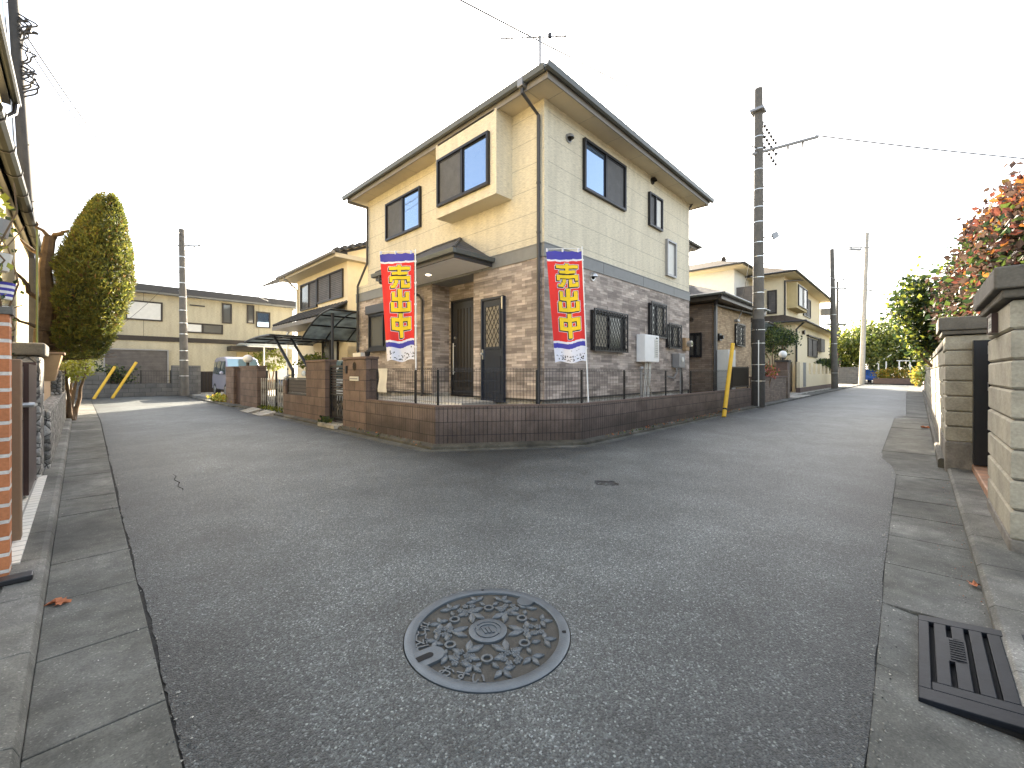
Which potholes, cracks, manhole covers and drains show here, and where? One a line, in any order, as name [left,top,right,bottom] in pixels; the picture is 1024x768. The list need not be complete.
manhole cover [404,588,570,694]
crack [91,401,185,768]
drain grate [918,614,1024,741]
